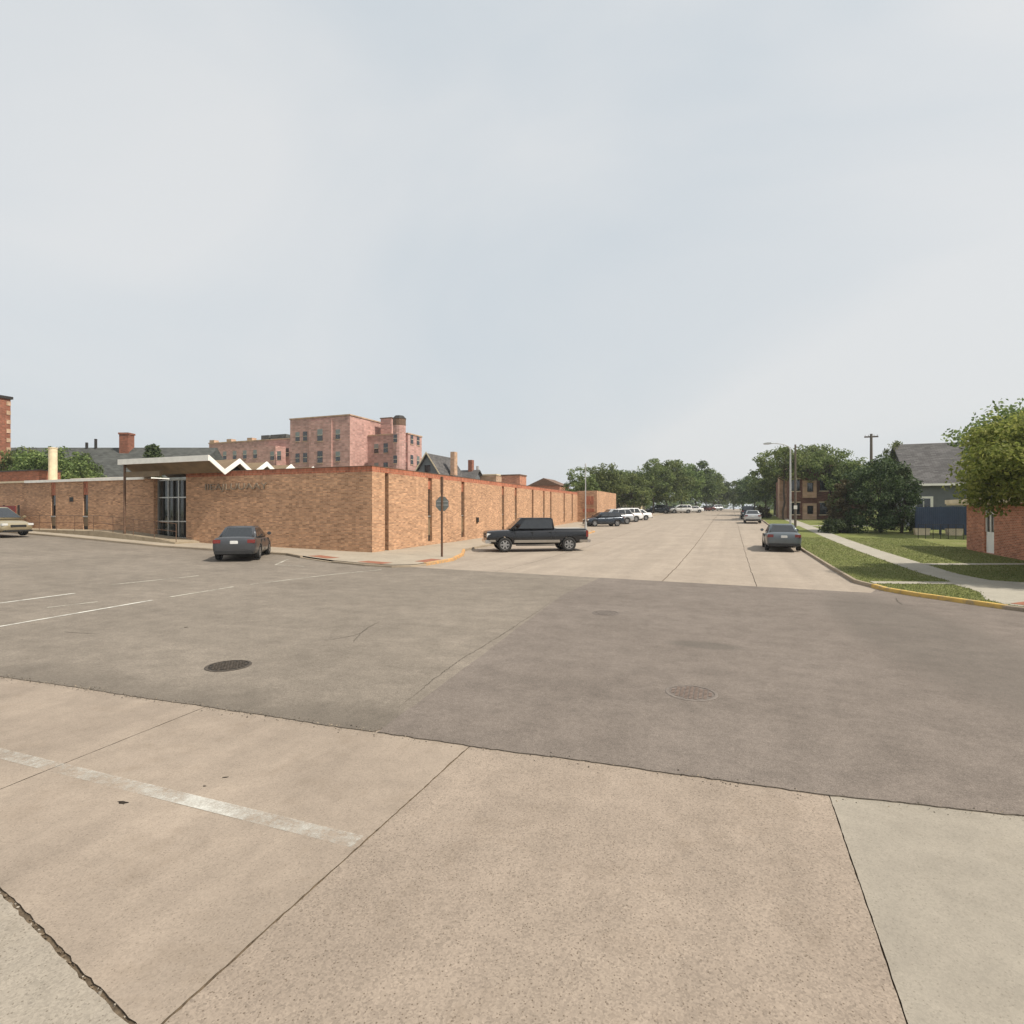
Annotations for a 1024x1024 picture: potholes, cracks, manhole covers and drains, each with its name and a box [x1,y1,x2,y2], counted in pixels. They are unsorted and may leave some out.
crack [0,887,137,1024]
manhole cover [204,660,252,672]
manhole cover [665,685,718,701]
